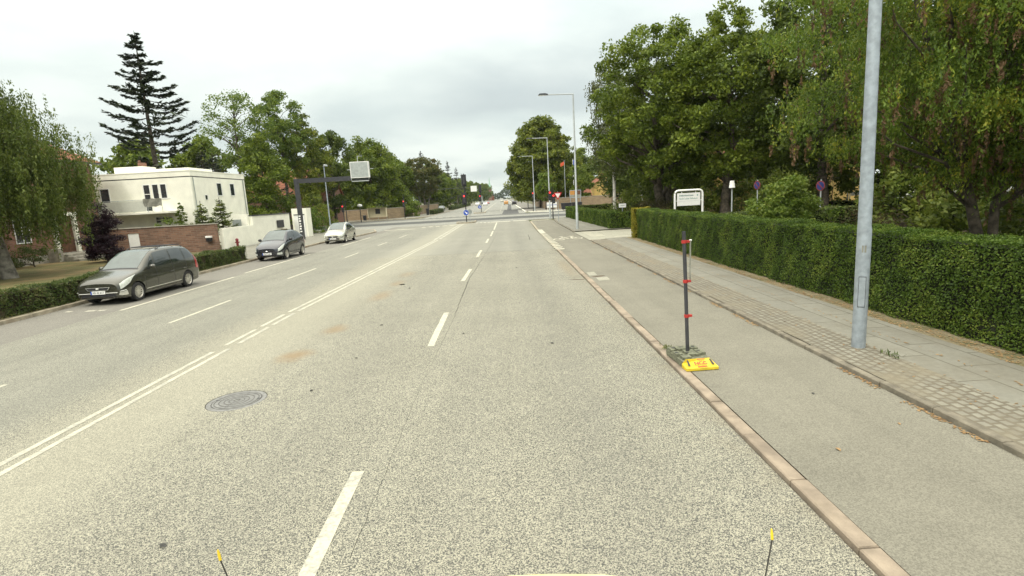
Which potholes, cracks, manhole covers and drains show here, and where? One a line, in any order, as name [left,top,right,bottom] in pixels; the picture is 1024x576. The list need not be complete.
manhole cover [205,391,267,412]
crack [350,239,494,558]
